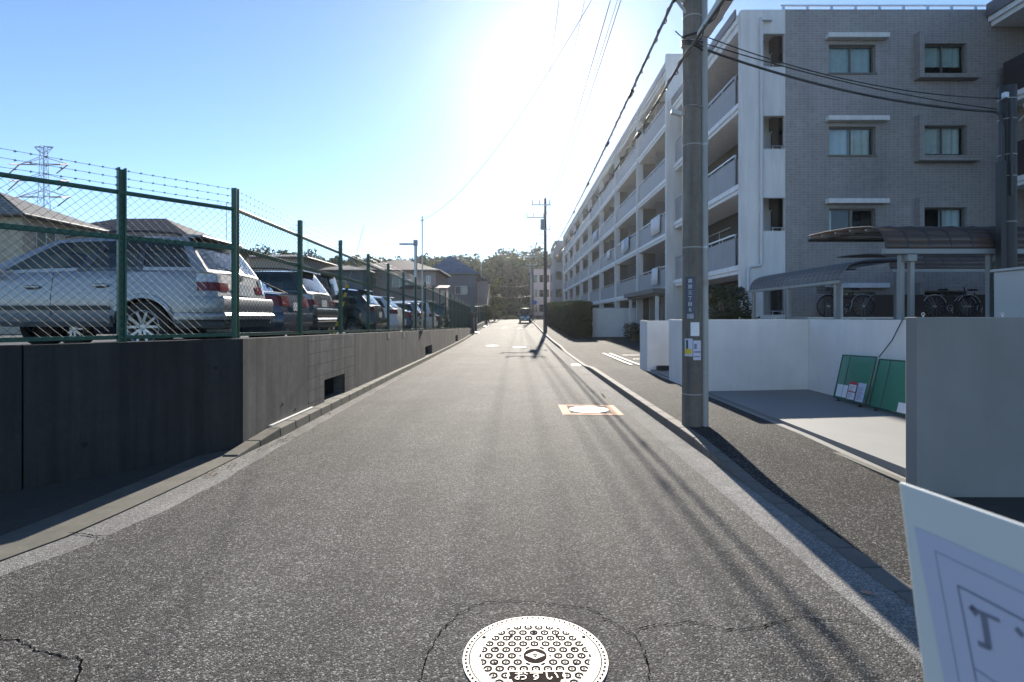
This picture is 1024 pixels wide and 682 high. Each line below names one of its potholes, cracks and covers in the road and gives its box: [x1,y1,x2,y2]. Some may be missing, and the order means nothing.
manhole cover [462,616,609,682]
crack [0,634,112,682]
crack [418,599,872,682]
